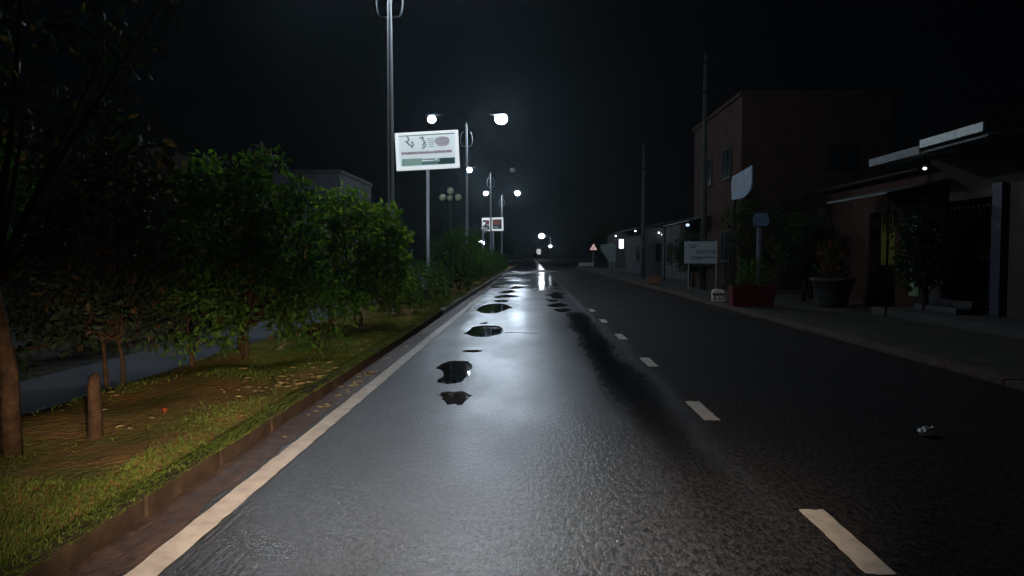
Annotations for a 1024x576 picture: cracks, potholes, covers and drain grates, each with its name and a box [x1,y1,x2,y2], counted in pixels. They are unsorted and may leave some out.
pothole [477,304,513,314]
pothole [437,361,473,384]
pothole [463,325,503,337]
pothole [439,391,472,405]
